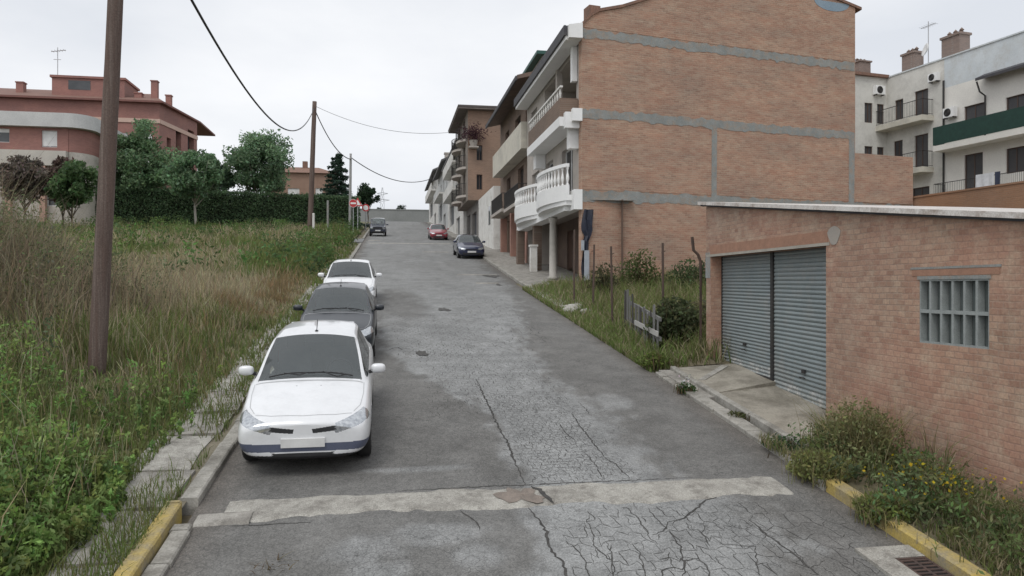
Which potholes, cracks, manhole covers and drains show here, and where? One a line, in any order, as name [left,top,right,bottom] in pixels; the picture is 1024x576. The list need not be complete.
drain grate [855,545,954,576]
crack [389,297,880,576]
